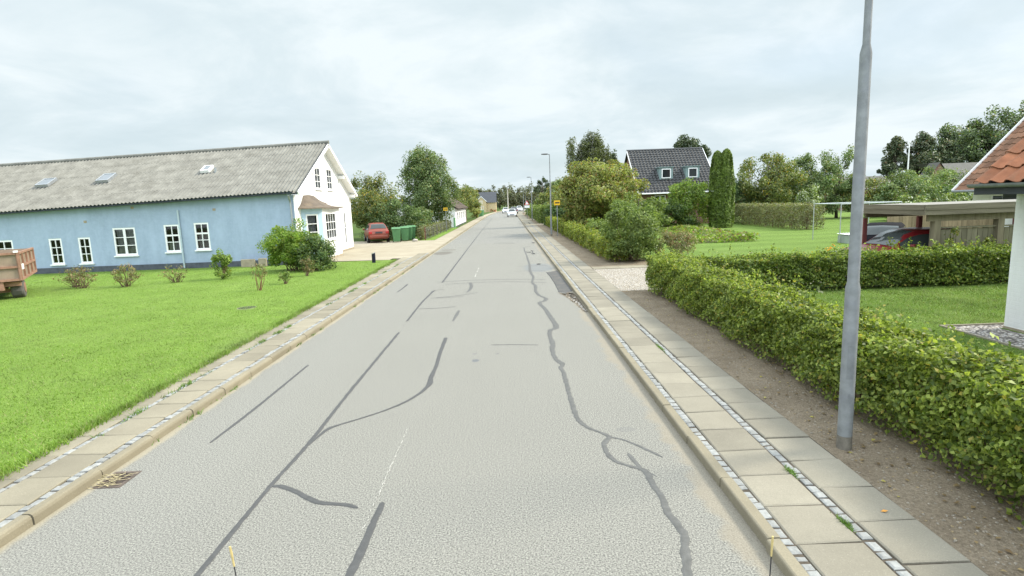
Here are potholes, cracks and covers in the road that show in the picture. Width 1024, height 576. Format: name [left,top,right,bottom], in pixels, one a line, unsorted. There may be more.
drain grate [90,471,142,489]
